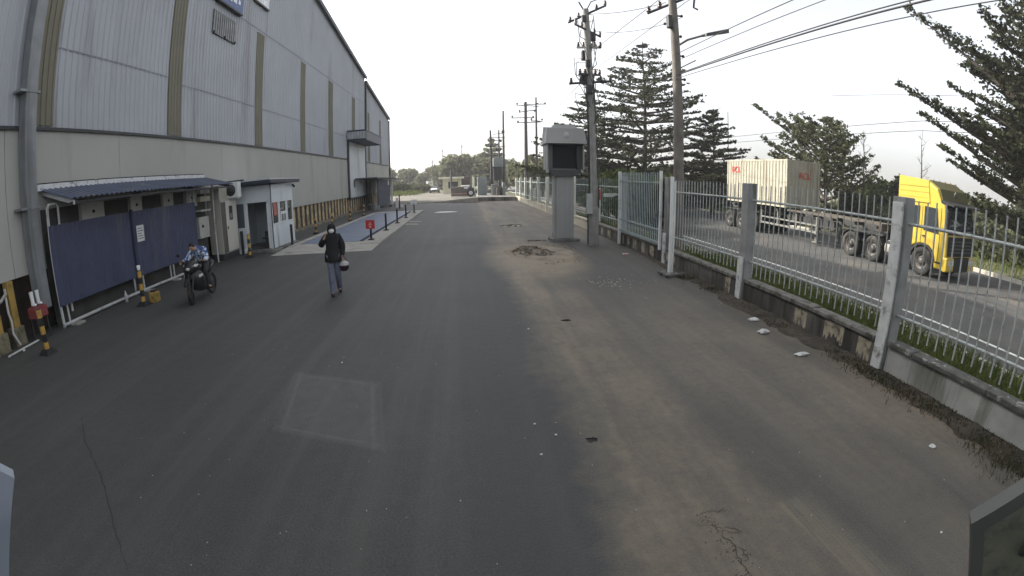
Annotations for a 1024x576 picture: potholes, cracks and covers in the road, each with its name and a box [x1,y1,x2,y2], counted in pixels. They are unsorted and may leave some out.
pothole [504,245,574,260]
crack [696,508,753,576]
crack [81,411,130,576]
